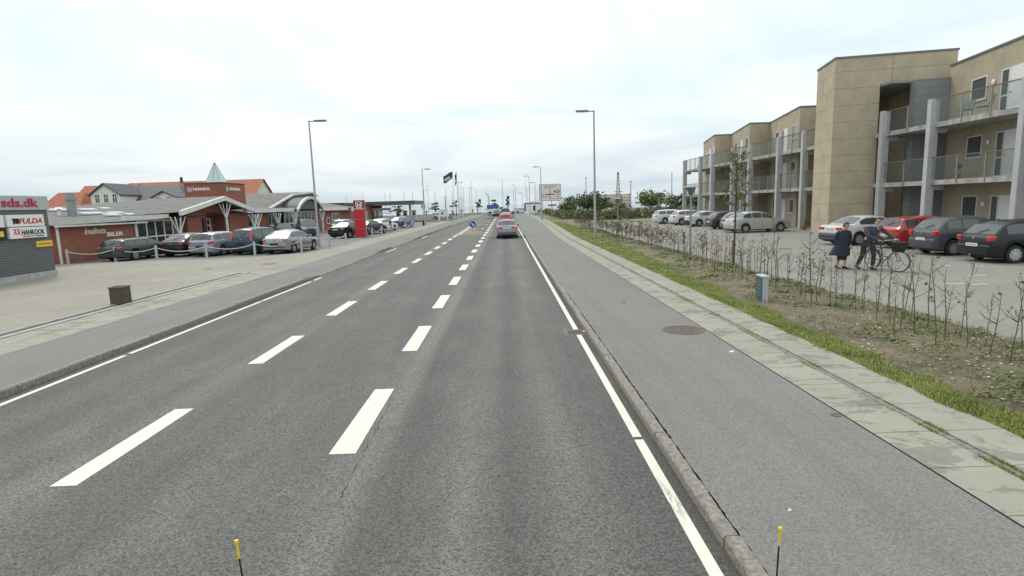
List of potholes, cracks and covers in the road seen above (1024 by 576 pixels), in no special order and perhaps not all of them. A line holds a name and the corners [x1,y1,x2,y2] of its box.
manhole cover [662,325,705,335]
